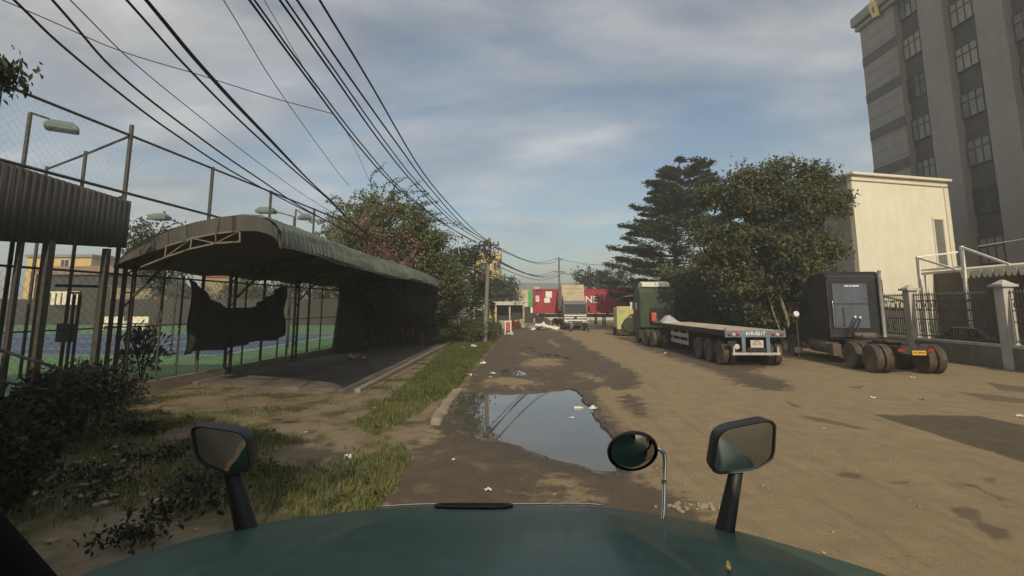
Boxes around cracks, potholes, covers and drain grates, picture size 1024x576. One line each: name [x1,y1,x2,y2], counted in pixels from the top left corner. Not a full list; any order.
pothole [448,388,622,475]
